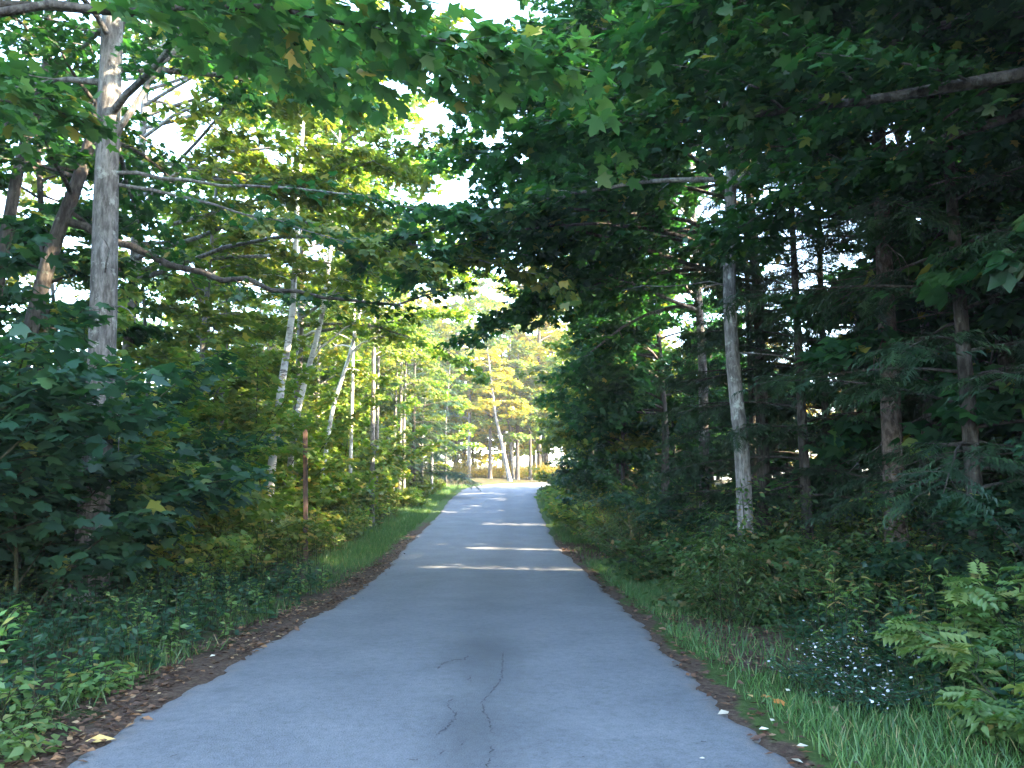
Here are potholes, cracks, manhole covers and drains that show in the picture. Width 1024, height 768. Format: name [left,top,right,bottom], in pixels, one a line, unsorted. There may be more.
crack [437,652,504,767]
